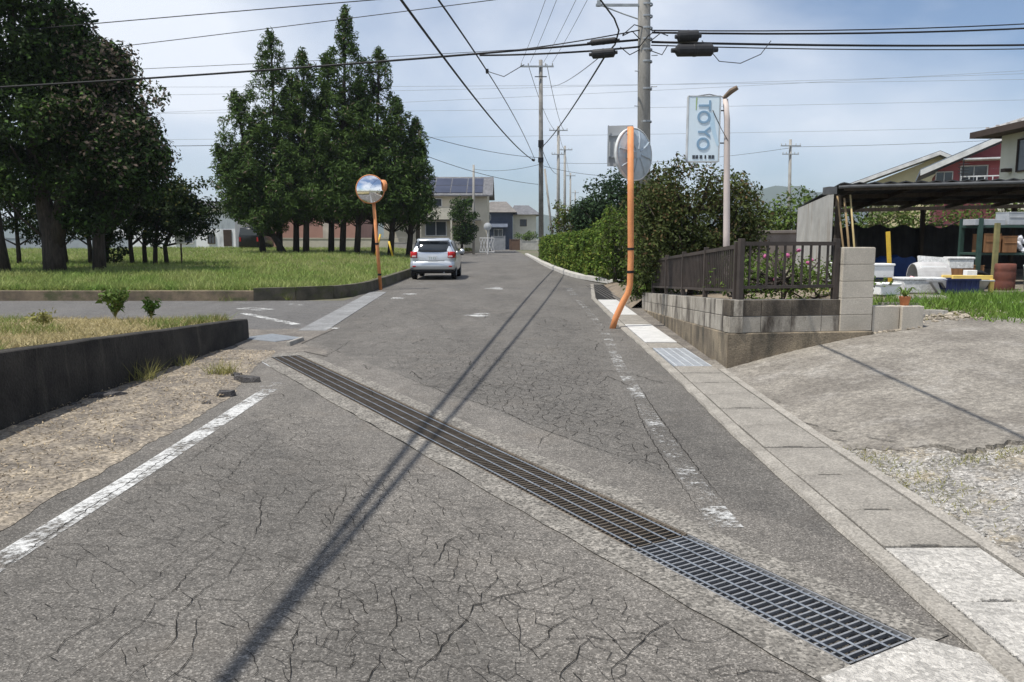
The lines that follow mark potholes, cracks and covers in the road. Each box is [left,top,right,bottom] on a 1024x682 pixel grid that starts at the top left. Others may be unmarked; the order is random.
drain grate [522,481,687,549]
drain grate [320,380,388,400]
drain grate [653,348,712,367]
drain grate [352,396,433,422]
crack [2,404,777,682]
drain grate [293,366,352,383]
drain grate [393,417,492,451]
crack [221,302,726,512]
drain grate [586,285,621,300]
drain grate [631,535,913,664]
drain grate [448,444,572,491]
drain grate [273,355,323,369]
